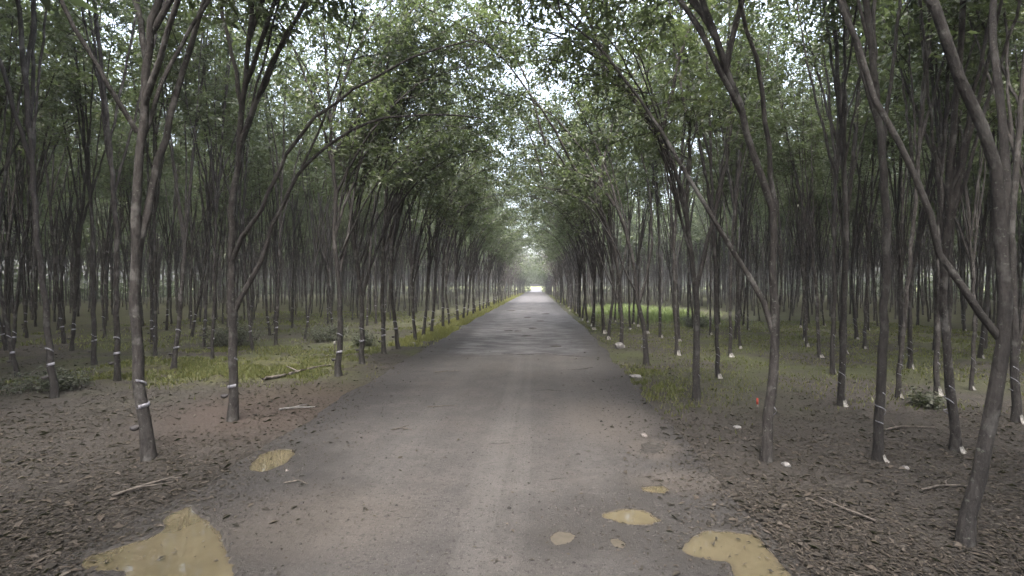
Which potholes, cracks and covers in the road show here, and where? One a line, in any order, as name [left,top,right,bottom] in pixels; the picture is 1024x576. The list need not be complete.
pothole [550,531,576,545]
pothole [681,529,793,576]
pothole [601,507,662,525]
pothole [76,505,238,576]
pothole [248,448,296,472]
pothole [641,485,669,493]
pothole [610,538,626,548]
